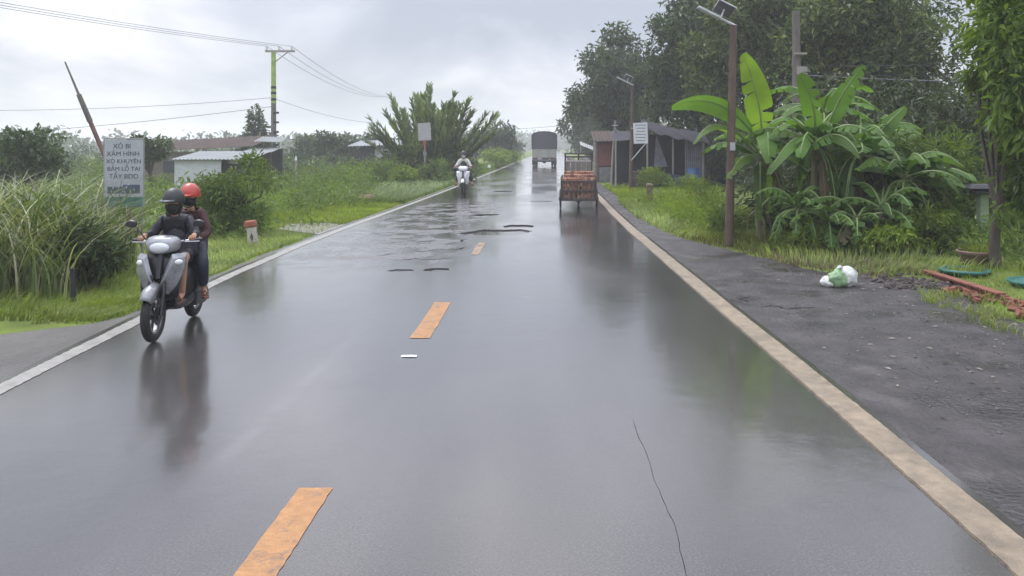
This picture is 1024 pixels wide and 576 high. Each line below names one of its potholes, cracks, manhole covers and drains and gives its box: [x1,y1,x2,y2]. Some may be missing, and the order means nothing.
crack [633,421,687,576]
